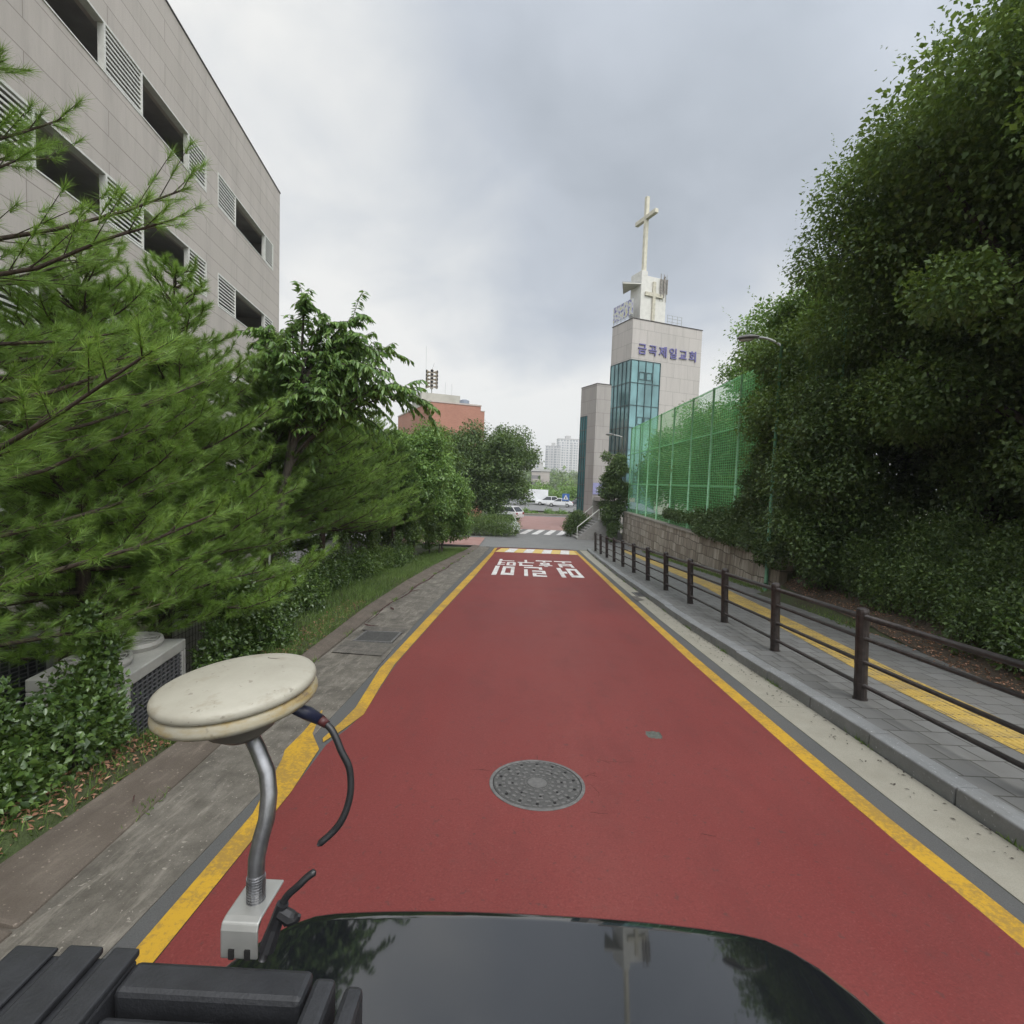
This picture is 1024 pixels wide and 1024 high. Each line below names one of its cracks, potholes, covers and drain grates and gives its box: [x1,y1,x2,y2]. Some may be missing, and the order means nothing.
drain grate [352,631,402,644]
manhole cover [489,760,585,811]
